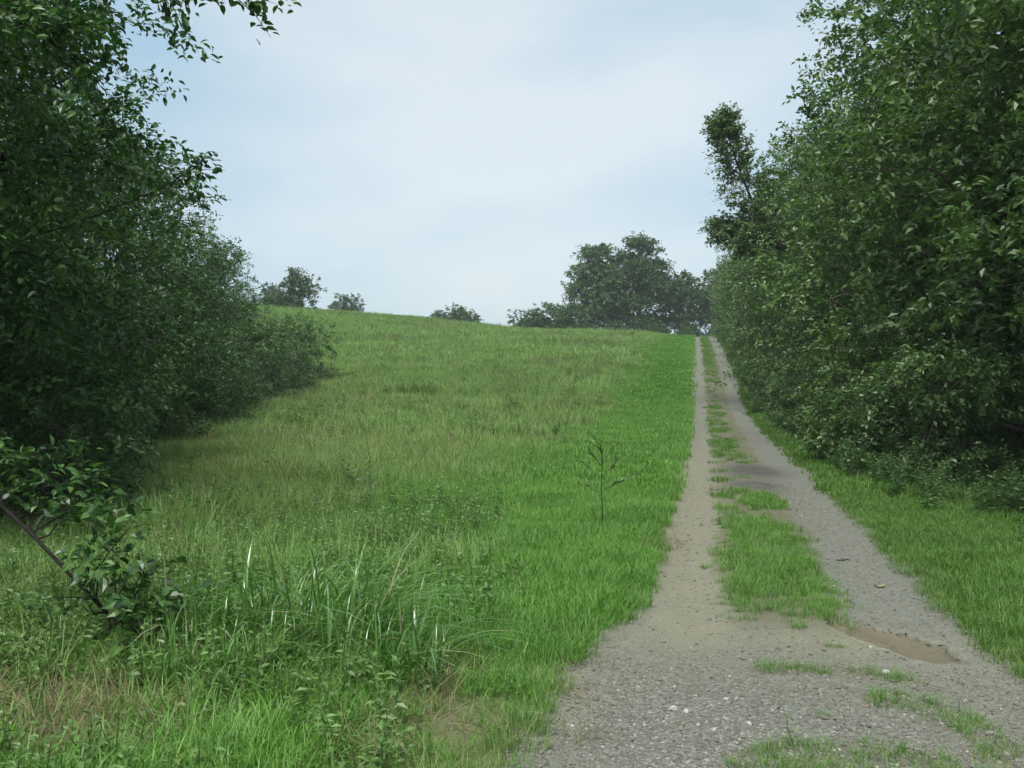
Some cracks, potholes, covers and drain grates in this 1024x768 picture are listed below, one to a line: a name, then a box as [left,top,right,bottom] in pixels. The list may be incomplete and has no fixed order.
pothole [809,615,986,670]
